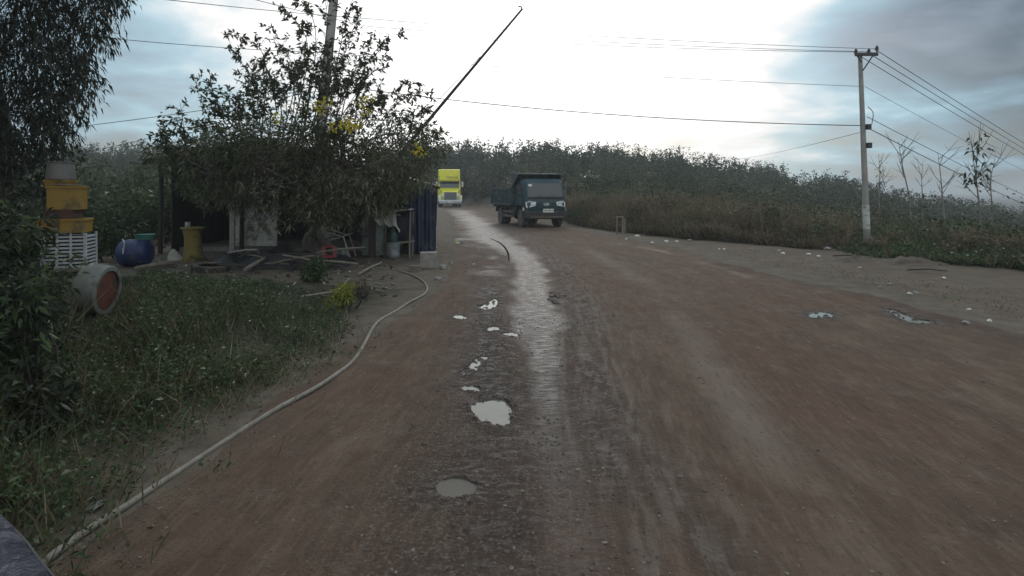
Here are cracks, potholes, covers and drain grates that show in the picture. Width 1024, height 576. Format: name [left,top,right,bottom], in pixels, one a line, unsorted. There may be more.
pothole [456,353,492,376]
pothole [881,306,936,325]
pothole [454,384,482,392]
pothole [466,394,518,427]
pothole [478,298,499,311]
pothole [429,473,485,500]
pothole [806,311,835,319]
